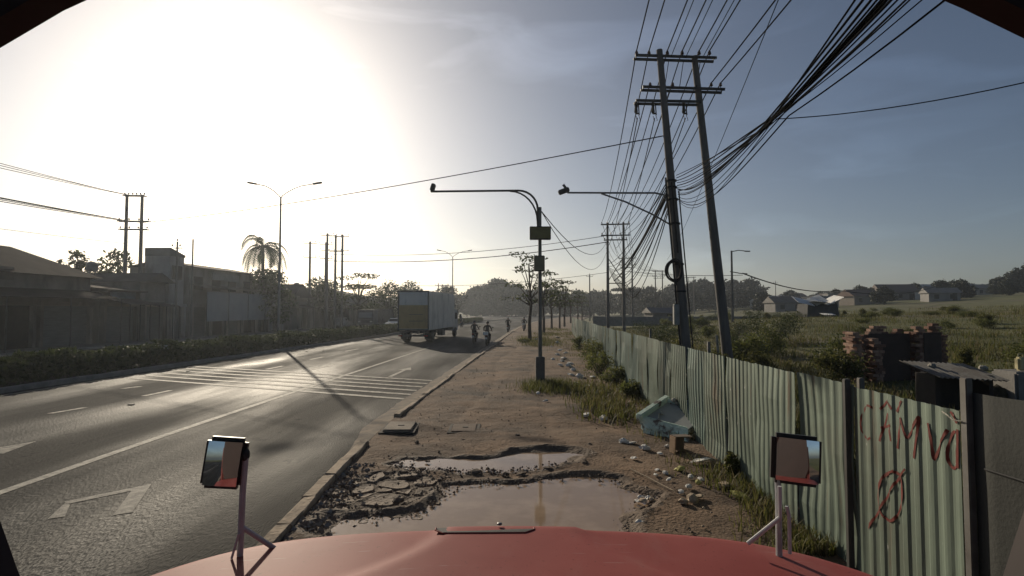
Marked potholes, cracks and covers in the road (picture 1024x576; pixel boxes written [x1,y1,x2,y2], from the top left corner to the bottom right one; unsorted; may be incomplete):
manhole cover [447,424,481,434]
manhole cover [378,421,420,435]
crack [320,467,450,523]
pothole [380,443,597,476]
pothole [293,469,672,538]
